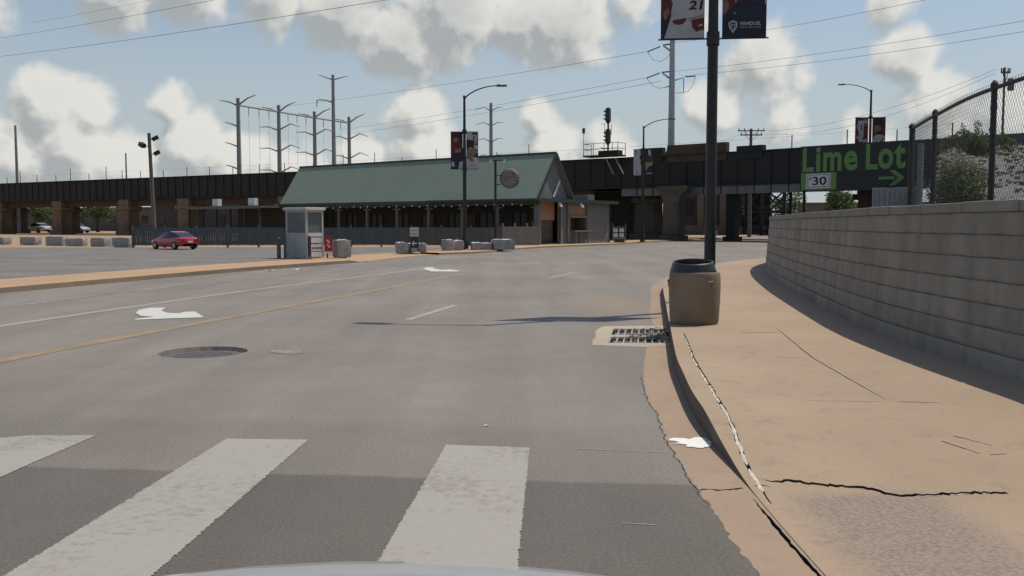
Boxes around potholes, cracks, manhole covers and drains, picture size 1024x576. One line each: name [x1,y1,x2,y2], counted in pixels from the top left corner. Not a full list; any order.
drain grate [592,326,671,347]
crack [641,332,1006,576]
manhole cover [158,346,248,358]
